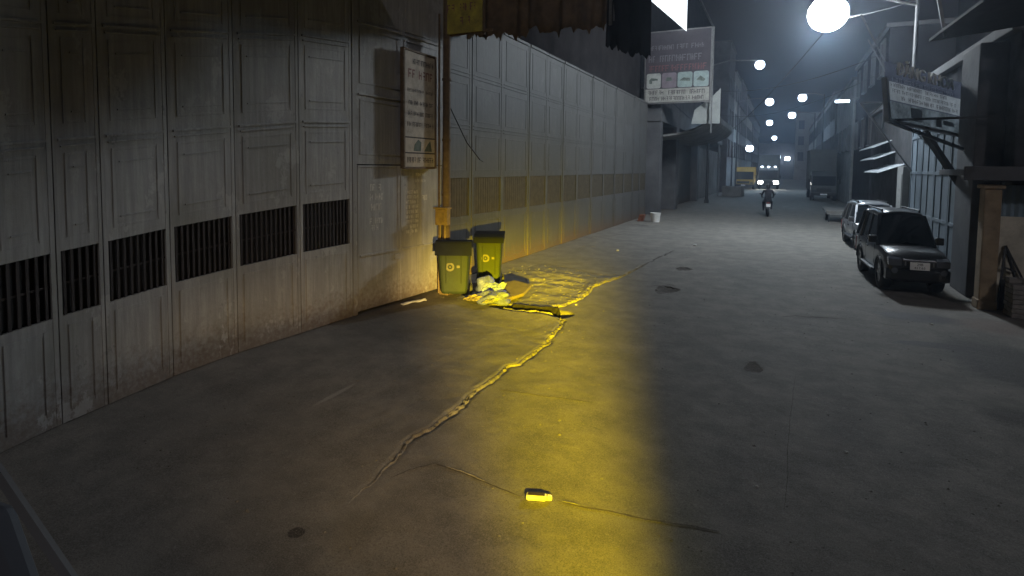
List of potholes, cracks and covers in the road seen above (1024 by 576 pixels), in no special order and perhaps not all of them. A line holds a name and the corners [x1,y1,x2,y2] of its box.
pothole [742,360,765,374]
crack [783,374,797,514]
crack [340,224,720,532]
pothole [652,284,683,295]
